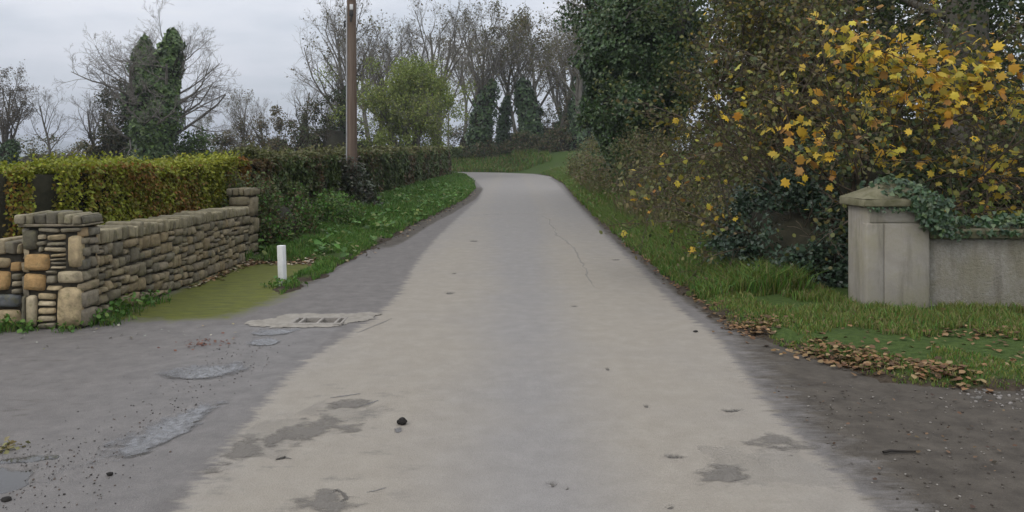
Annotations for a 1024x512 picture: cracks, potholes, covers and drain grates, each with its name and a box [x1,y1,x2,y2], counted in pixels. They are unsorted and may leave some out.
pothole [0,468,33,494]
drain grate [245,312,382,328]
